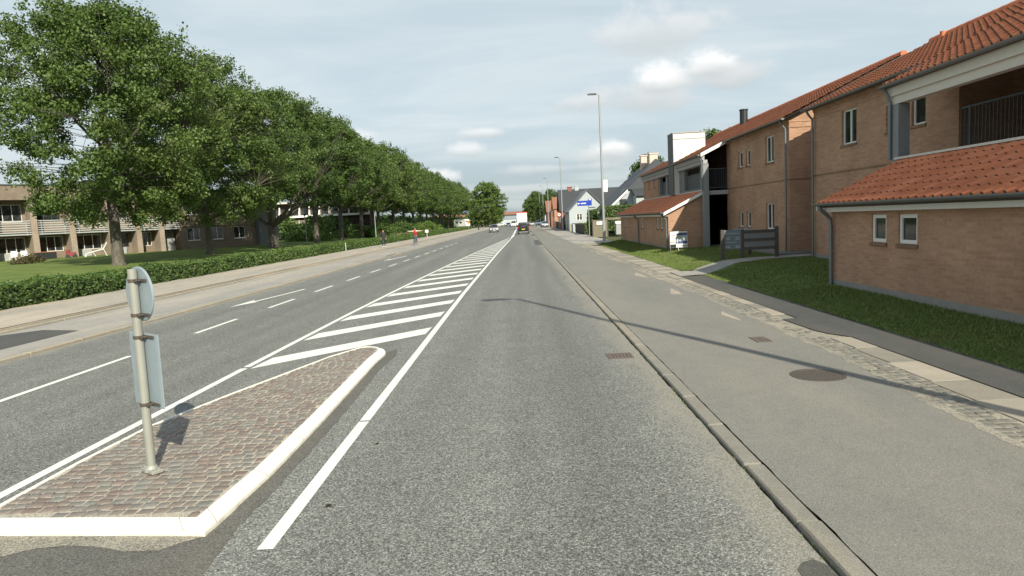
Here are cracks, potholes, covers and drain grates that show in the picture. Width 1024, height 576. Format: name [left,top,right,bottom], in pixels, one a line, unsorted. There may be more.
manhole cover [789,369,847,382]
